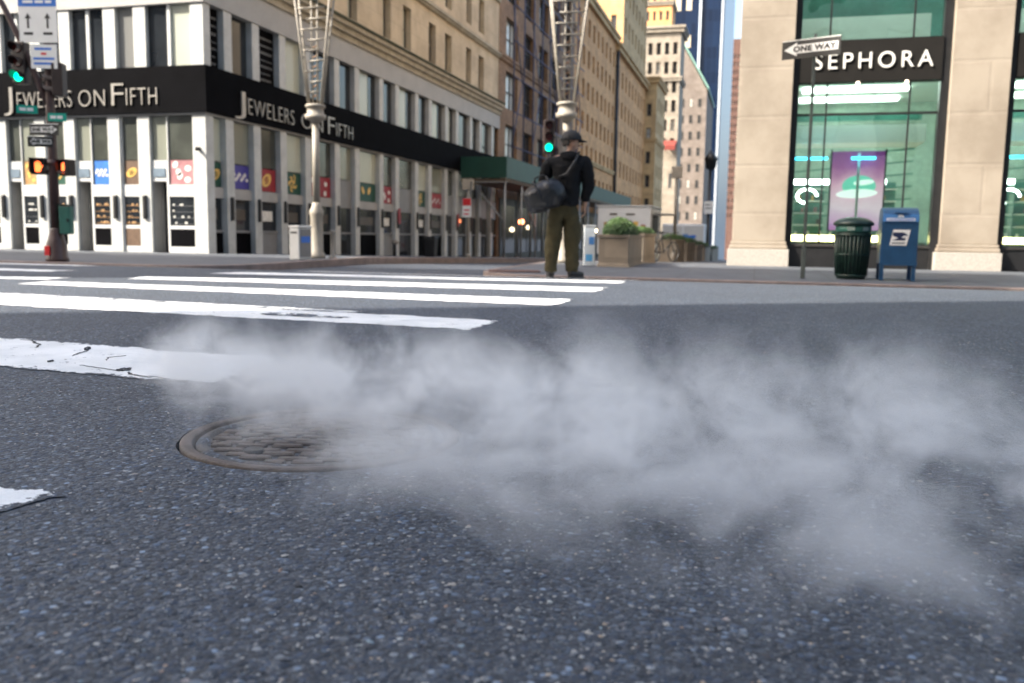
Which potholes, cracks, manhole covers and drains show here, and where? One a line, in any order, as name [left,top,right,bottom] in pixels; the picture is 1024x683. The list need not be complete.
manhole cover [179,408,458,473]
